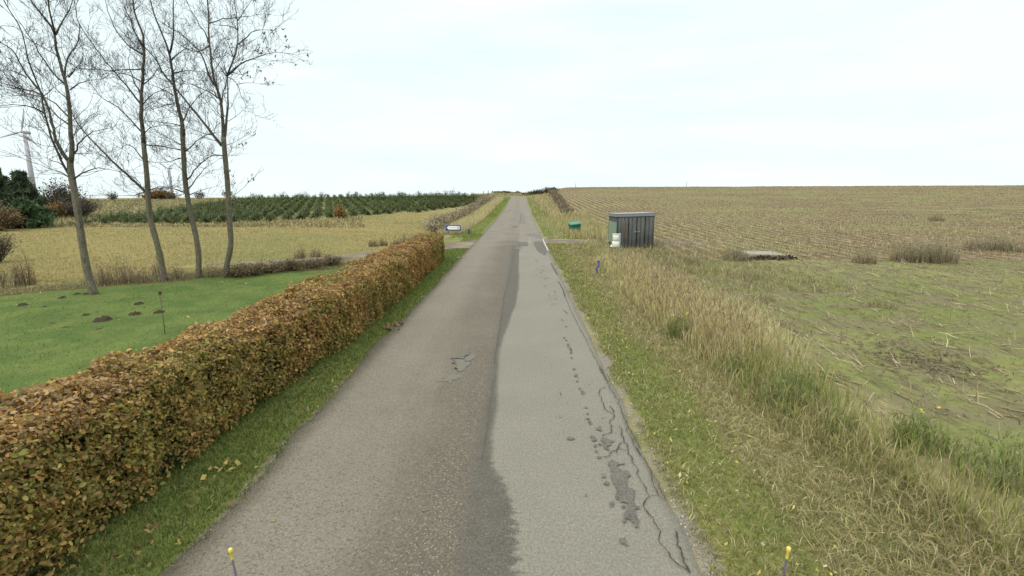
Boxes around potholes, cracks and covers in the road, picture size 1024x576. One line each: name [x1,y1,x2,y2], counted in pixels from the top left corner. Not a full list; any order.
crack [599,387,691,573]
pothole [608,459,640,527]
pothole [451,354,476,371]
